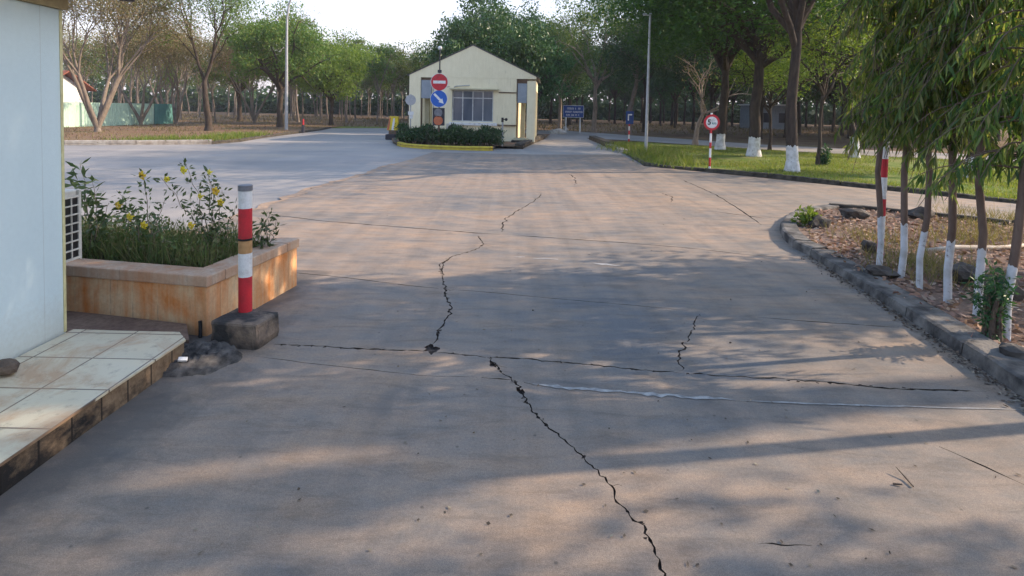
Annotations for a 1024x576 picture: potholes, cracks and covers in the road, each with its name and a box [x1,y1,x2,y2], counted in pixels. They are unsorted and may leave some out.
crack [279,194,969,576]
